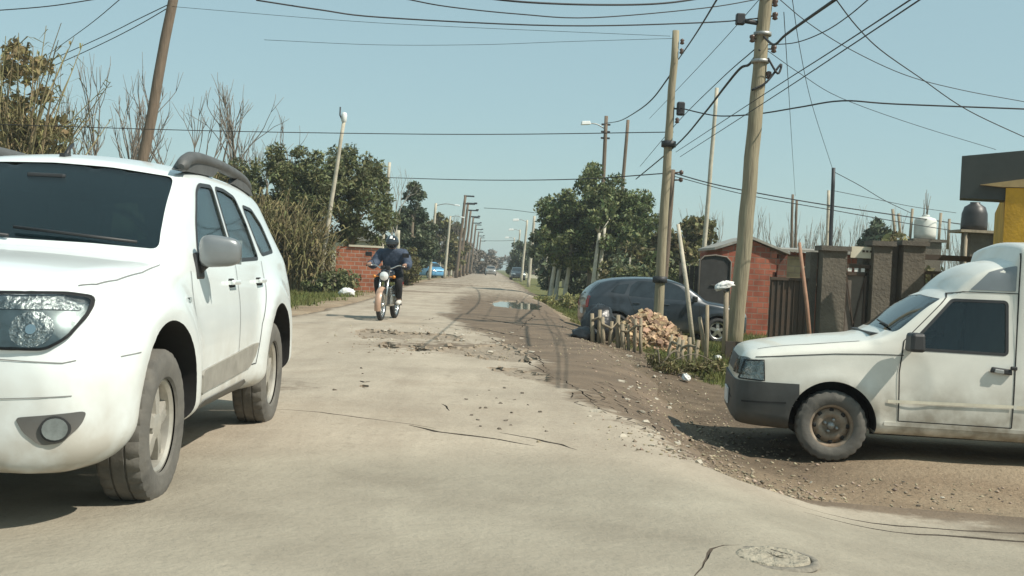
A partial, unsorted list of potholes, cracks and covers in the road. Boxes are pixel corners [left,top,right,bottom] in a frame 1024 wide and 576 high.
pothole [406,344,432,352]
pothole [434,343,538,363]
manhole cover [736,546,820,573]
pothole [377,341,402,349]
crack [410,425,576,450]
crack [694,545,725,576]
pothole [486,366,552,382]
crack [427,298,674,440]
pothole [354,329,462,341]
